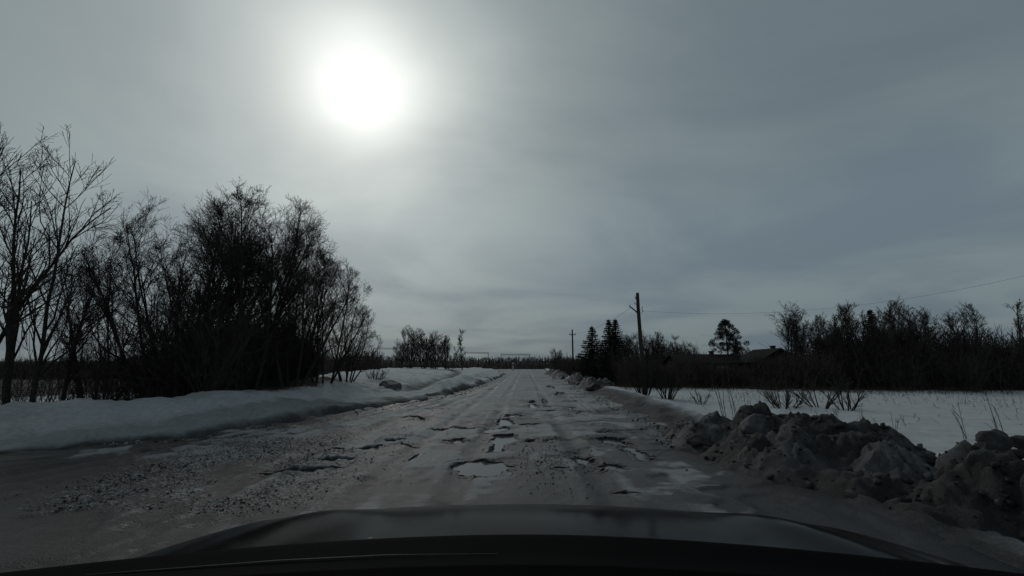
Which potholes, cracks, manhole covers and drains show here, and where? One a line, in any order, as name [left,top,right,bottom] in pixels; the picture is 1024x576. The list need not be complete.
pothole [442,457,521,481]
pothole [481,433,523,454]
pothole [442,437,472,445]
pothole [619,446,663,462]
pothole [590,435,636,448]
pothole [492,417,519,427]
